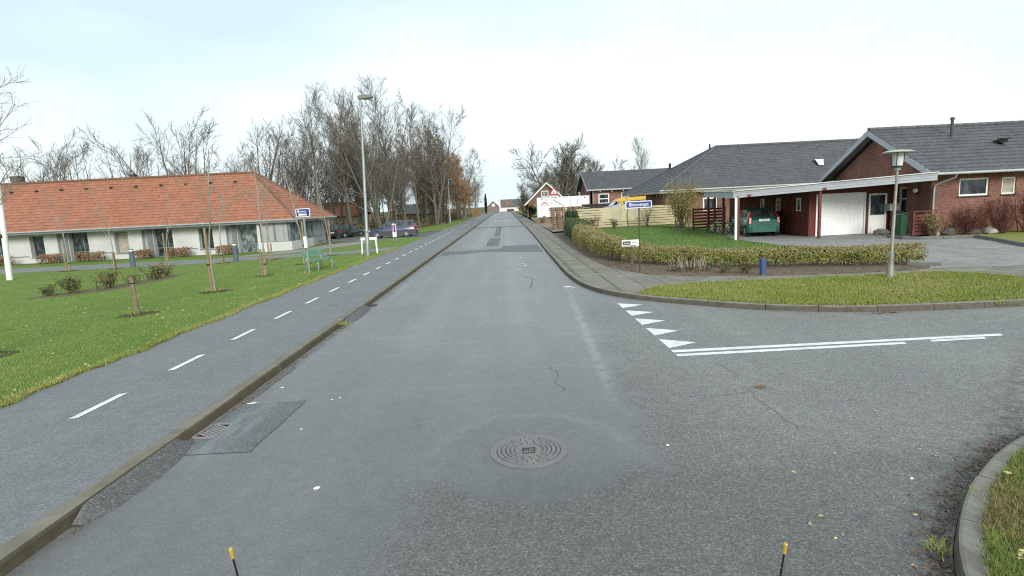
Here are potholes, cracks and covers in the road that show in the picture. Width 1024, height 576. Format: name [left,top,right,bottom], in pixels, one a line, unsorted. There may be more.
drain grate [192,423,233,439]
manhole cover [490,434,568,469]
